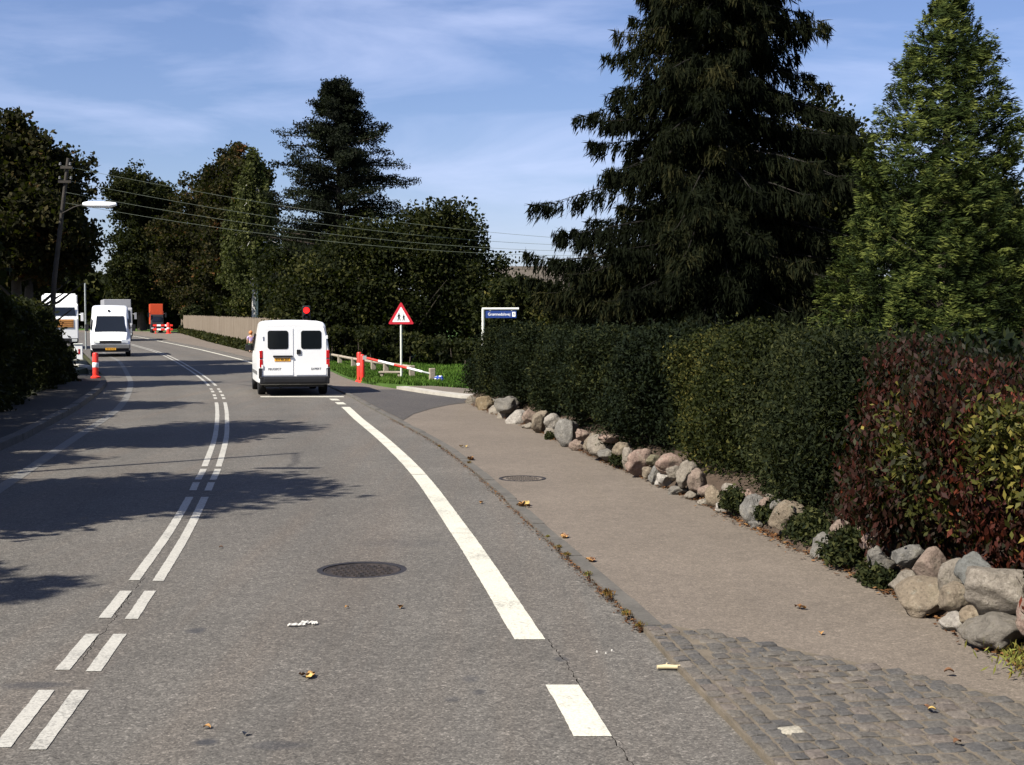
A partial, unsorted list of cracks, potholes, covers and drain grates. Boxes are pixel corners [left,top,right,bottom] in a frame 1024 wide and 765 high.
manhole cover [317,562,407,578]
crack [548,639,634,765]
